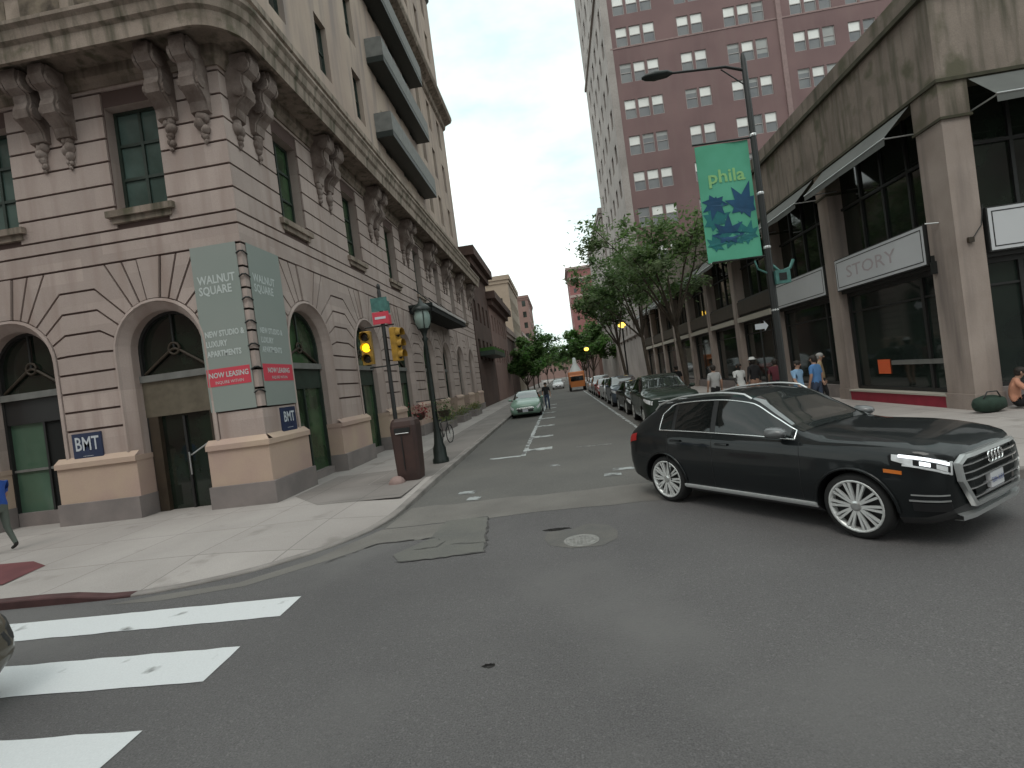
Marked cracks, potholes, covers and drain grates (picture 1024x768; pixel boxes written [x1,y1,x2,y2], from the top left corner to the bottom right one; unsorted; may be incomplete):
manhole cover [564,534,600,546]
